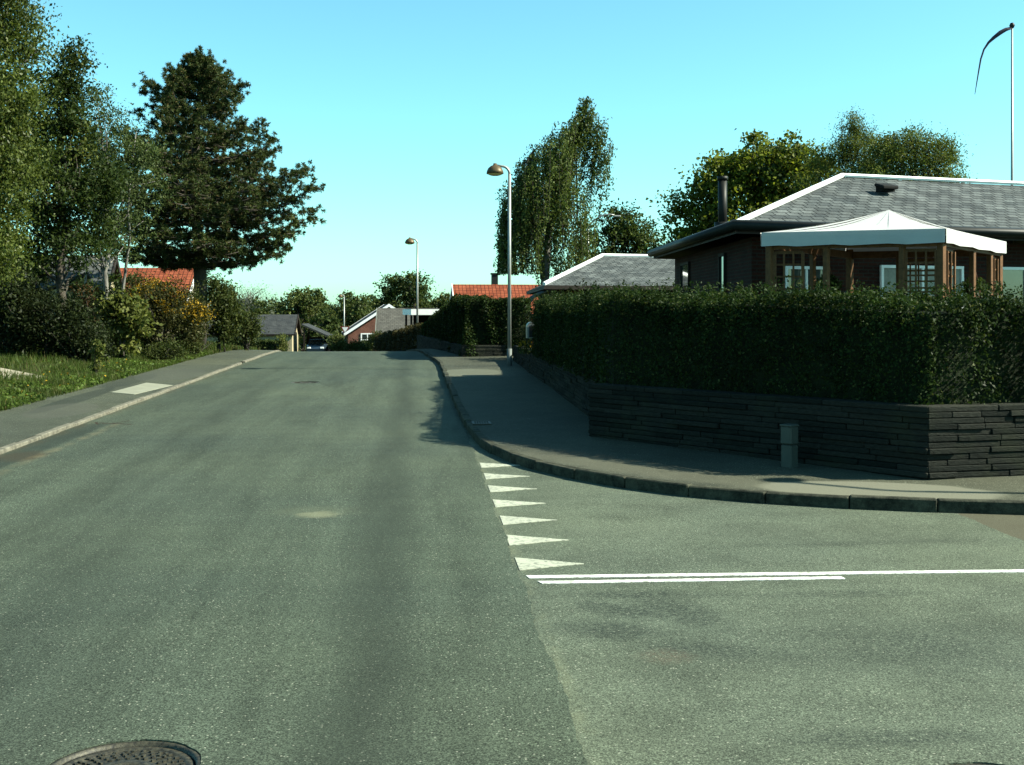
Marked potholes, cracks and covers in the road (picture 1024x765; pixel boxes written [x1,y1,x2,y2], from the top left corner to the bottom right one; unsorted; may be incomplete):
manhole cover [50,741,201,765]
